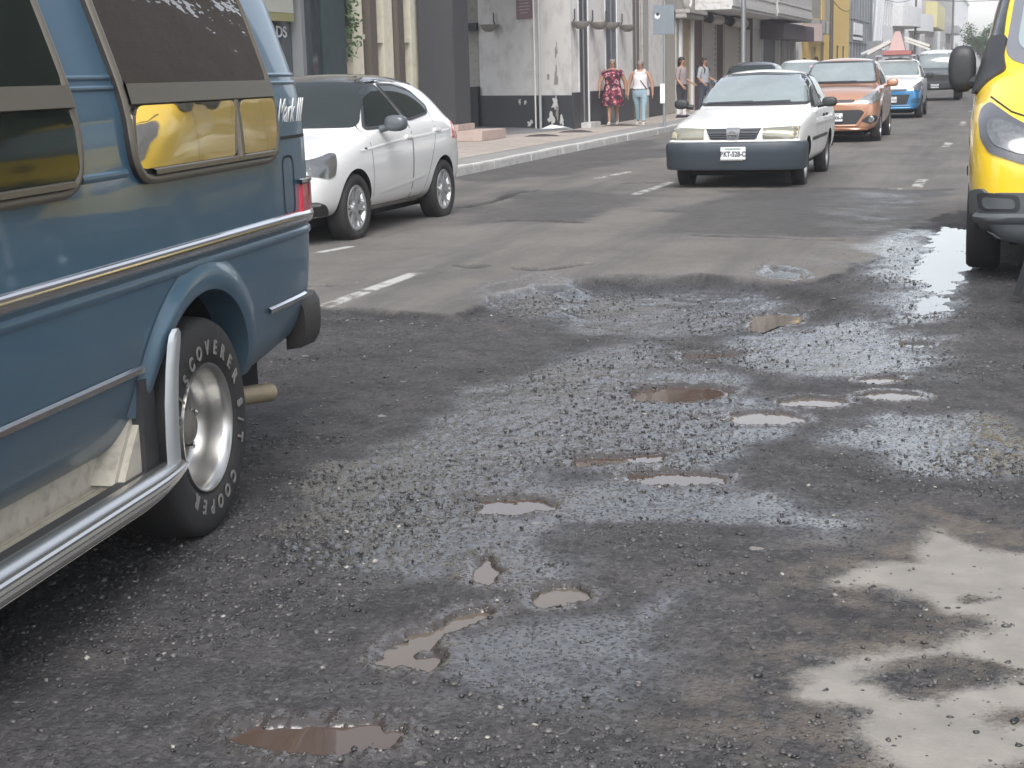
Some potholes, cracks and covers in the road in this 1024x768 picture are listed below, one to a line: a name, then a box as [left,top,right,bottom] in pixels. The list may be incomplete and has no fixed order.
pothole [543,273,864,336]
pothole [209,709,417,765]
pothole [458,548,512,588]
pothole [894,222,980,315]
pothole [356,598,509,674]
pothole [560,450,679,469]
pothole [460,492,572,517]
pothole [517,579,601,611]
pothole [847,388,933,403]
pothole [613,466,738,488]
pothole [755,265,816,284]
pothole [771,393,862,409]
